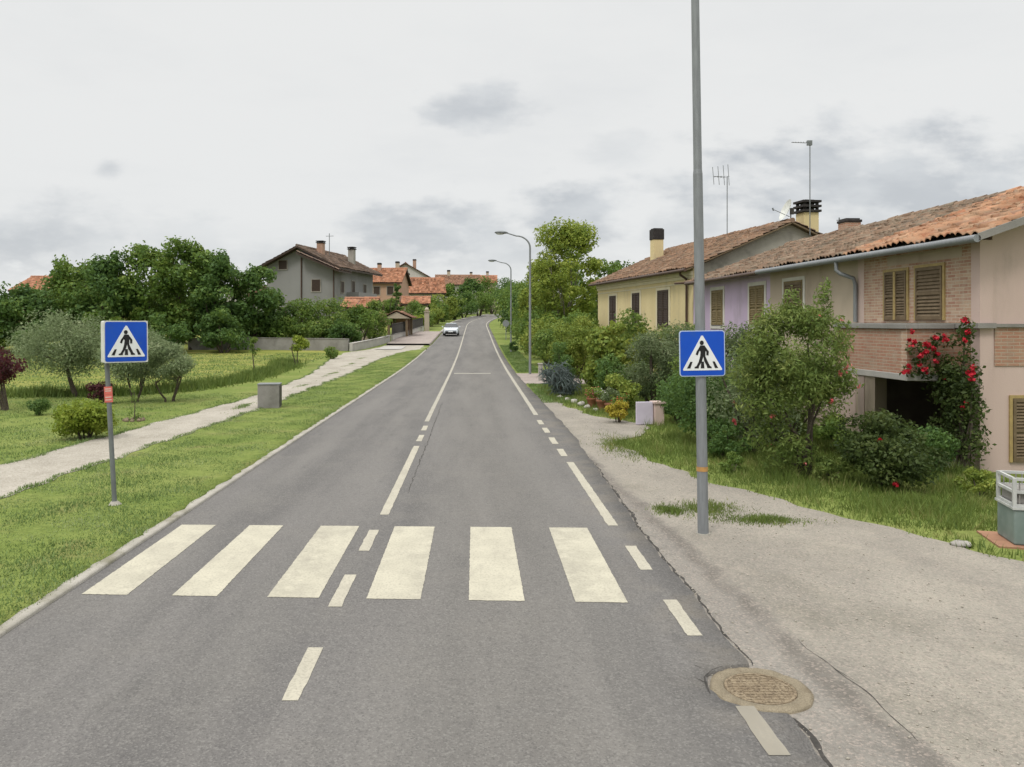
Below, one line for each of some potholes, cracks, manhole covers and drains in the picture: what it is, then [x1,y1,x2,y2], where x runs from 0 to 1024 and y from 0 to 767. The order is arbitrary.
crack [793,718,833,767]
manhole cover [710,667,814,714]
